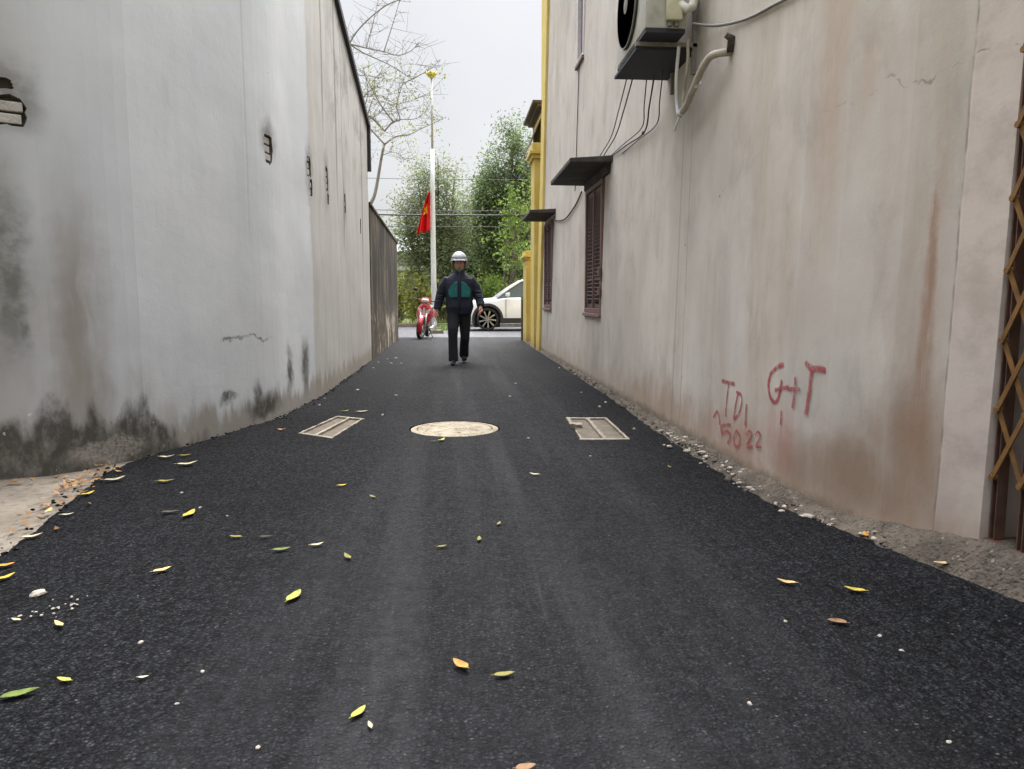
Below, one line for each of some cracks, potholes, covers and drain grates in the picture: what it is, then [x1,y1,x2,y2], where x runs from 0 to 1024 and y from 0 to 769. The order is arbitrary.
manhole cover [411,421,498,437]
